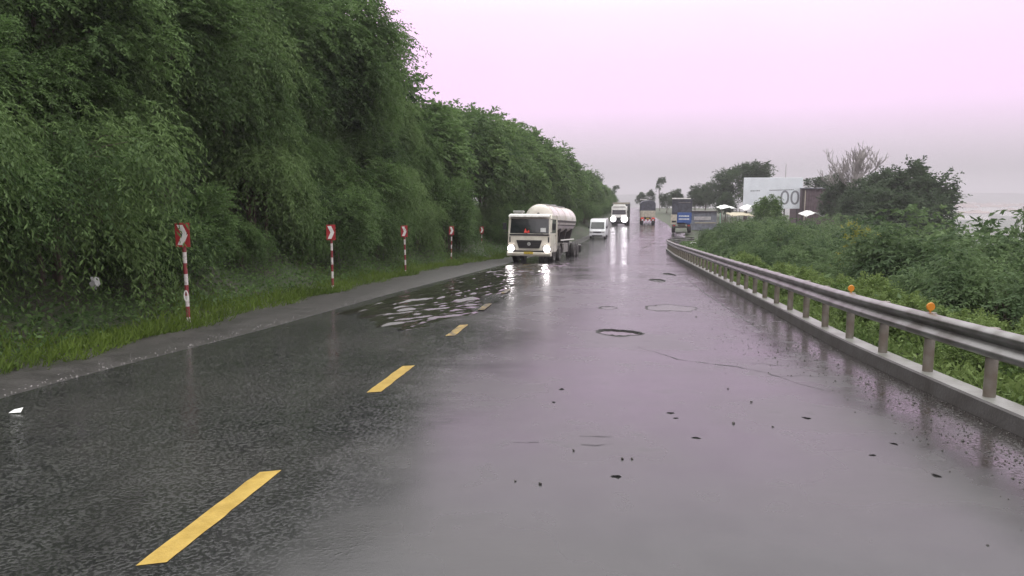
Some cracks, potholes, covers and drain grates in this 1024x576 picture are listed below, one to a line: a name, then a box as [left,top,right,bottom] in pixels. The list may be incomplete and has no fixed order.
pothole [595,329,645,337]
crack [664,354,830,390]
